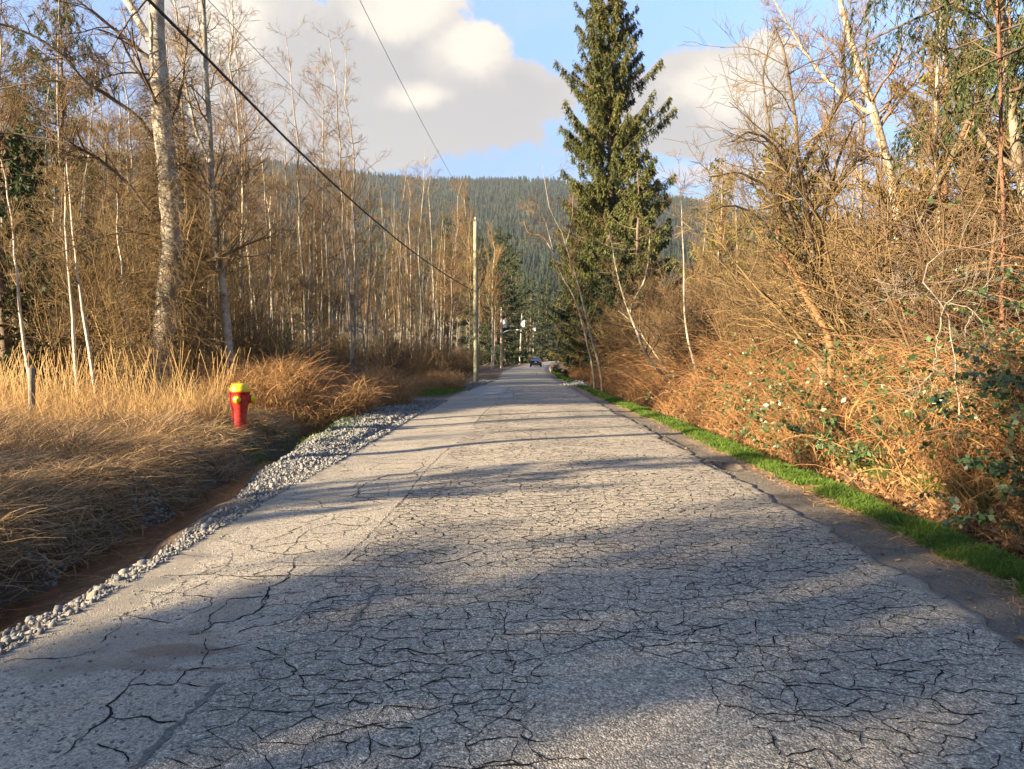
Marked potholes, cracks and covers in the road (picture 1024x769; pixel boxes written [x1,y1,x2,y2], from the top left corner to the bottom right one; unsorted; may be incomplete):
crack [57,400,489,766]
